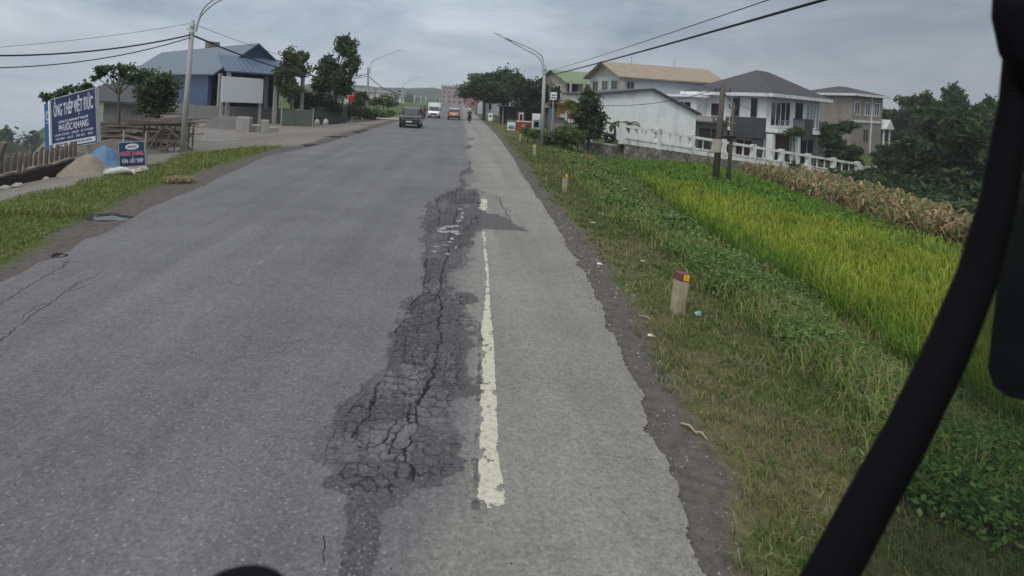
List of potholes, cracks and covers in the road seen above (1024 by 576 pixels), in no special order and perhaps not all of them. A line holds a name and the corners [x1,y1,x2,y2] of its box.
crack [0,261,102,341]
pothole [86,213,134,222]
crack [324,139,511,495]
